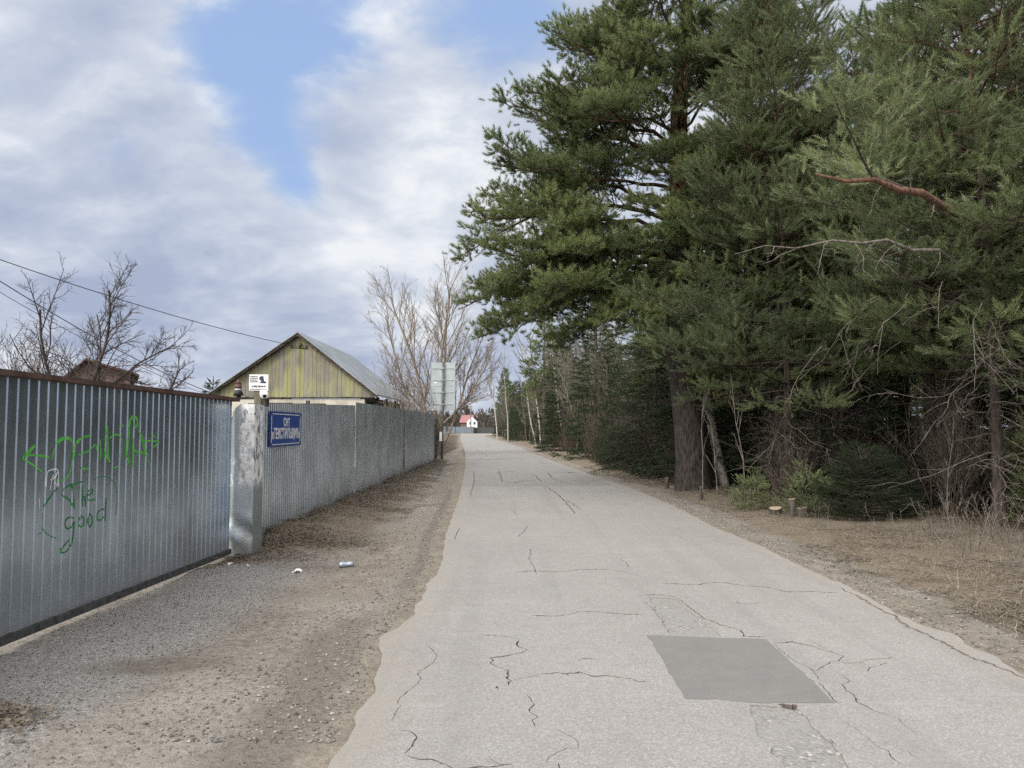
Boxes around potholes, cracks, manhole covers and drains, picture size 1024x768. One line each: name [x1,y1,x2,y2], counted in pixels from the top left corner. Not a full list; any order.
crack [479,451,588,513]
crack [479,634,647,726]
crack [392,646,514,768]
crack [536,582,1024,765]
